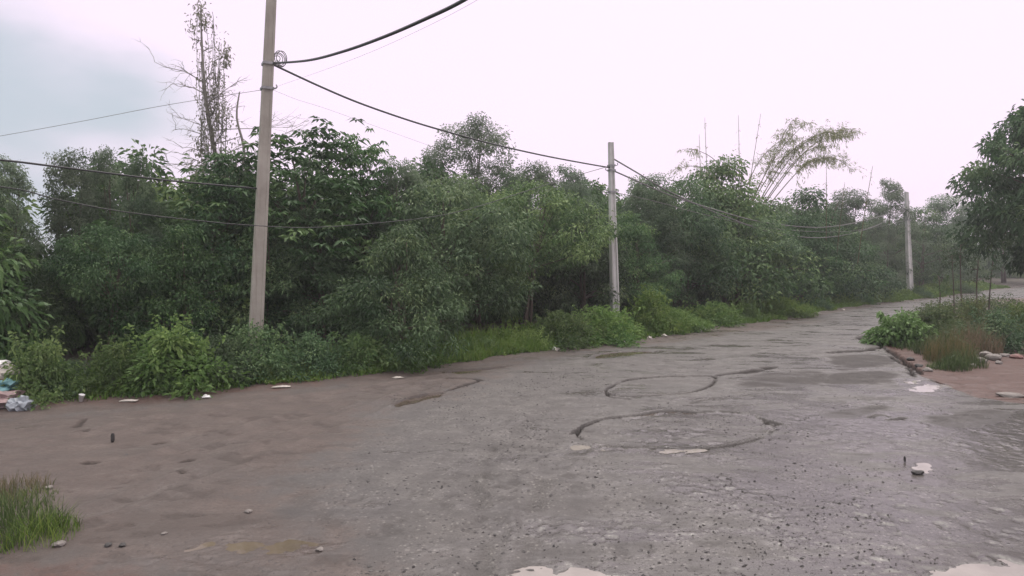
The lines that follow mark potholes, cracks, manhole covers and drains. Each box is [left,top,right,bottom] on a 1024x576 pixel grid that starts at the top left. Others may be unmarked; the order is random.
crack [440,376,486,392]
crack [570,366,783,450]
